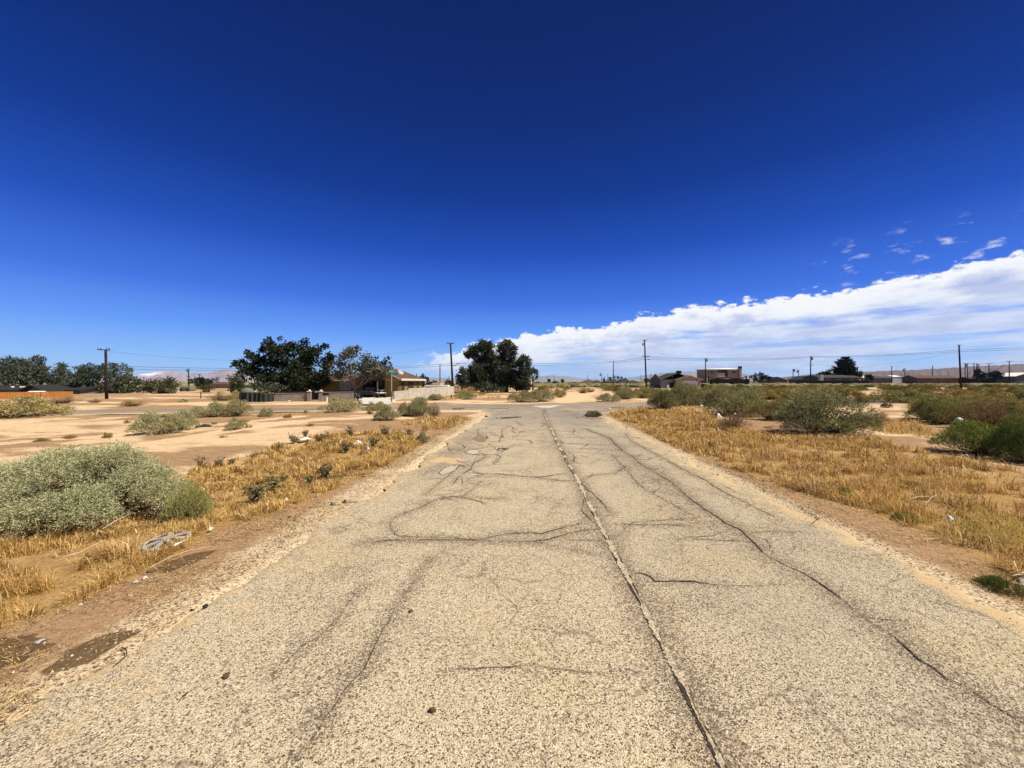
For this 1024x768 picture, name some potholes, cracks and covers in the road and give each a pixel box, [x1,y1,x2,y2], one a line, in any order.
crack [295,559,429,756]
crack [361,412,1024,768]
crack [266,589,361,679]
